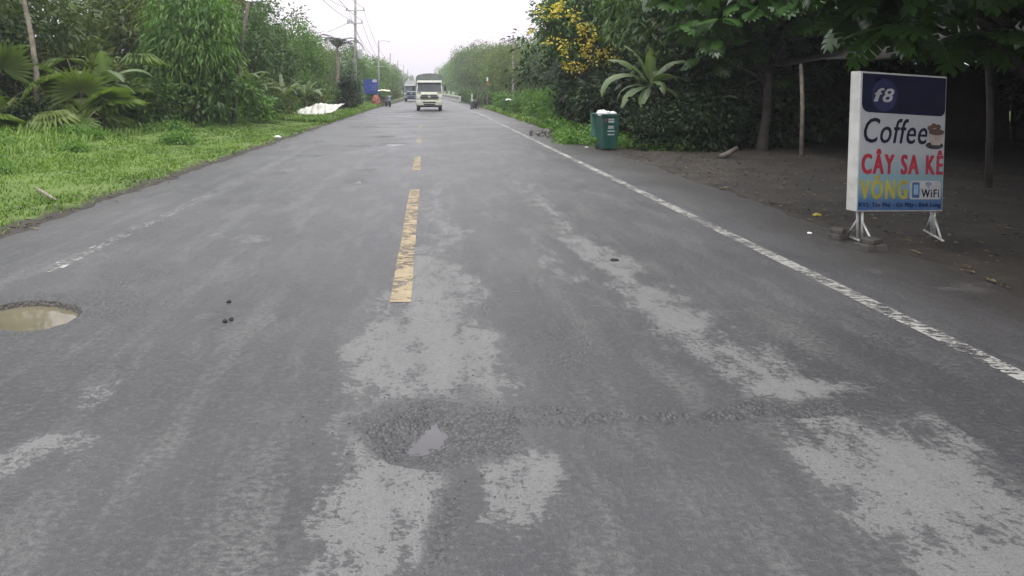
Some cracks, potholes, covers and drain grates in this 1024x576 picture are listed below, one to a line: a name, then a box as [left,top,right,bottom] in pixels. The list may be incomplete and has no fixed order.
pothole [0,300,83,332]
pothole [362,399,491,472]
